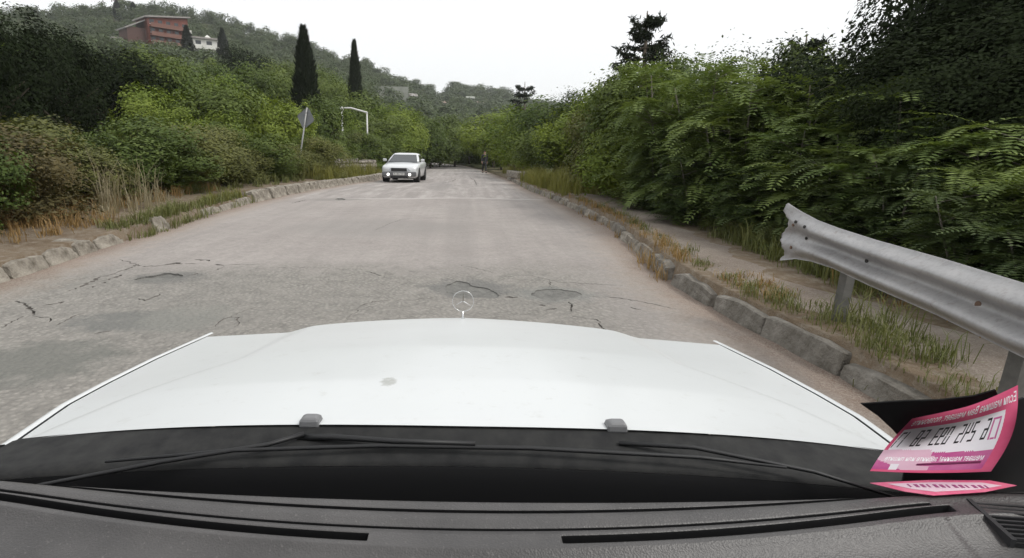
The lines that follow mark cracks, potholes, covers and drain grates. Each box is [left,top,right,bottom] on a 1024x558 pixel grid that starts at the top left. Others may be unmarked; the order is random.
pothole [531,289,582,301]
pothole [446,281,500,298]
crack [540,302,607,330]
pothole [135,273,183,282]
crack [1,259,248,328]
